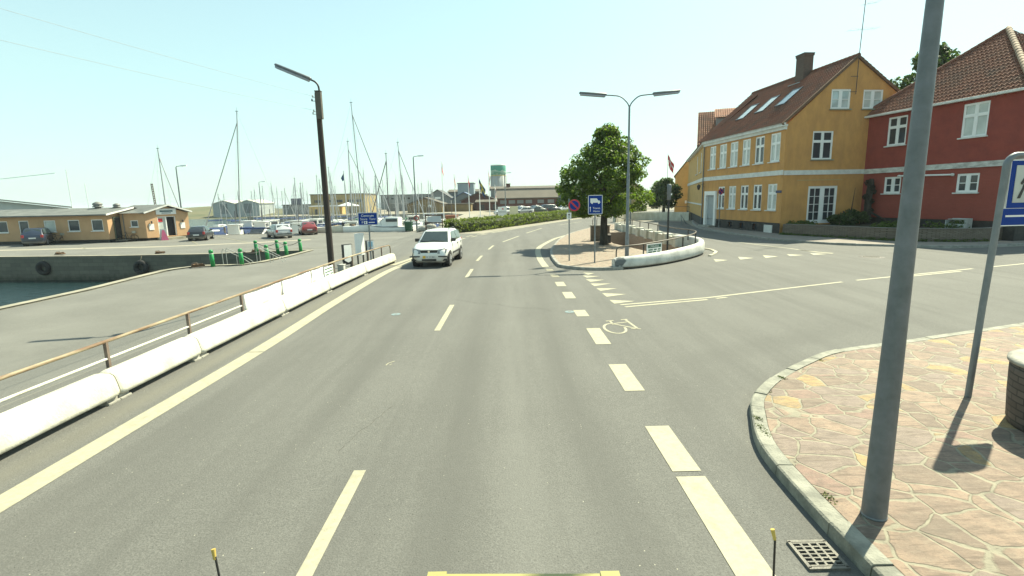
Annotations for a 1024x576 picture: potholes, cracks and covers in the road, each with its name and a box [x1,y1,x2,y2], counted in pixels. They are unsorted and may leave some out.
drain grate [786,539,851,572]
